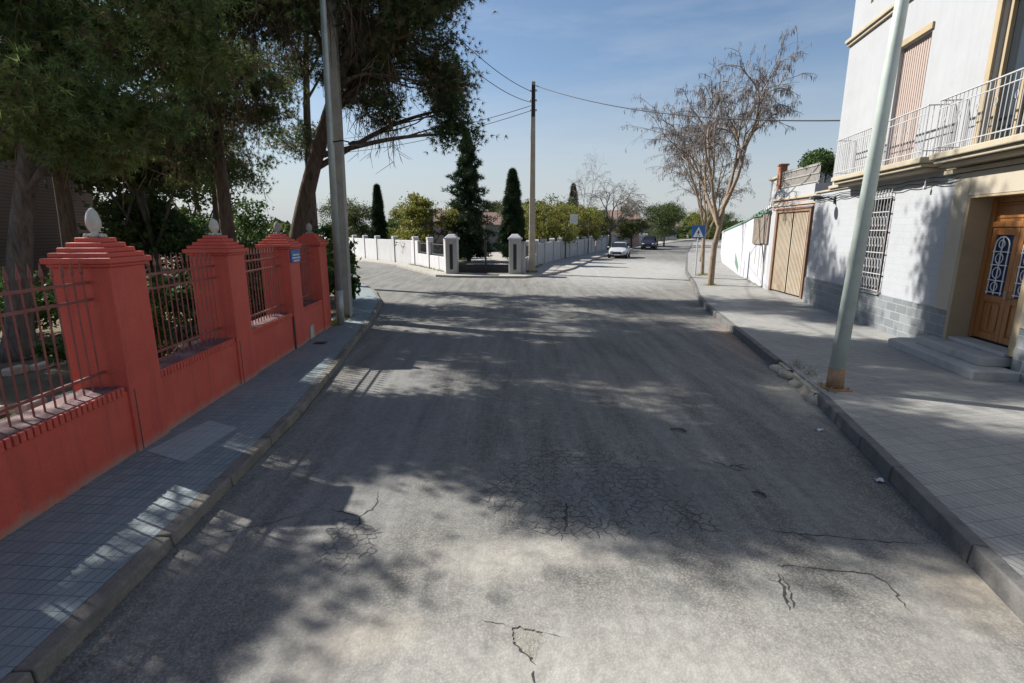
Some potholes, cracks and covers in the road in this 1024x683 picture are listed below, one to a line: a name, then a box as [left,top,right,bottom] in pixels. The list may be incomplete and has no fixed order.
crack [471,444,724,541]
crack [769,565,913,614]
crack [483,620,561,683]
crack [754,525,915,544]
crack [316,494,381,575]
